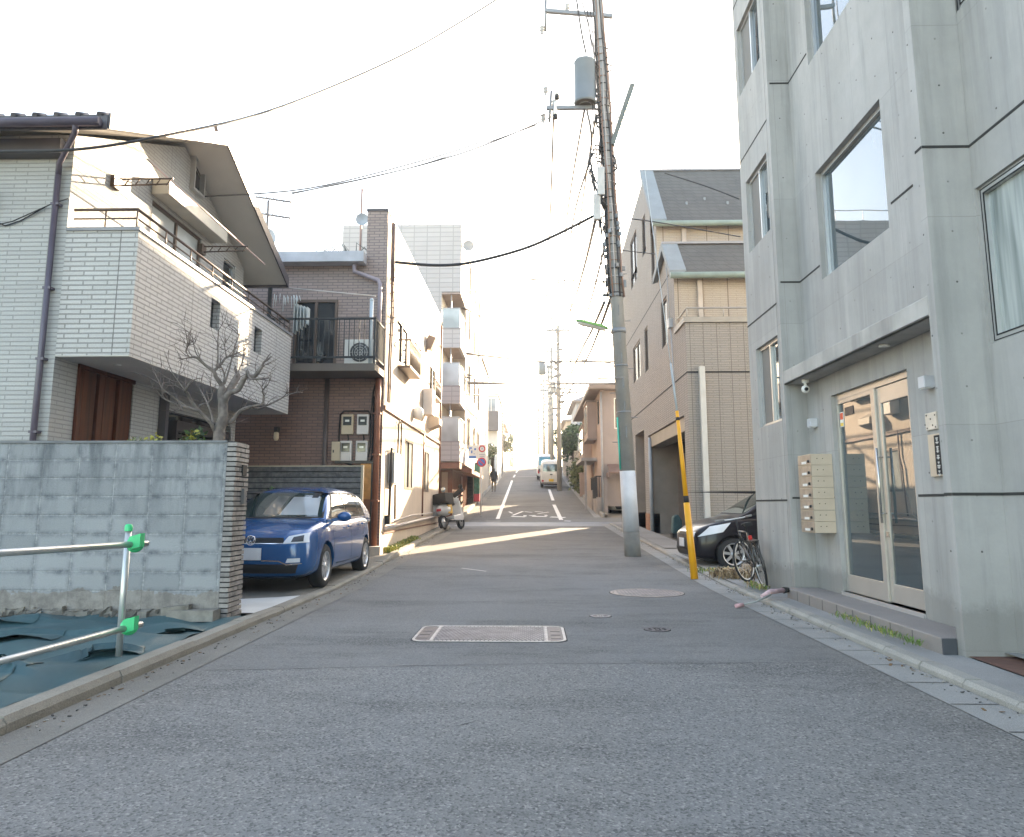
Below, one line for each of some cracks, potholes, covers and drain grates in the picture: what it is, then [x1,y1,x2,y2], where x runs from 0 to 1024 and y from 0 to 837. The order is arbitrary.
manhole cover [609,589,685,597]
manhole cover [411,625,568,643]
